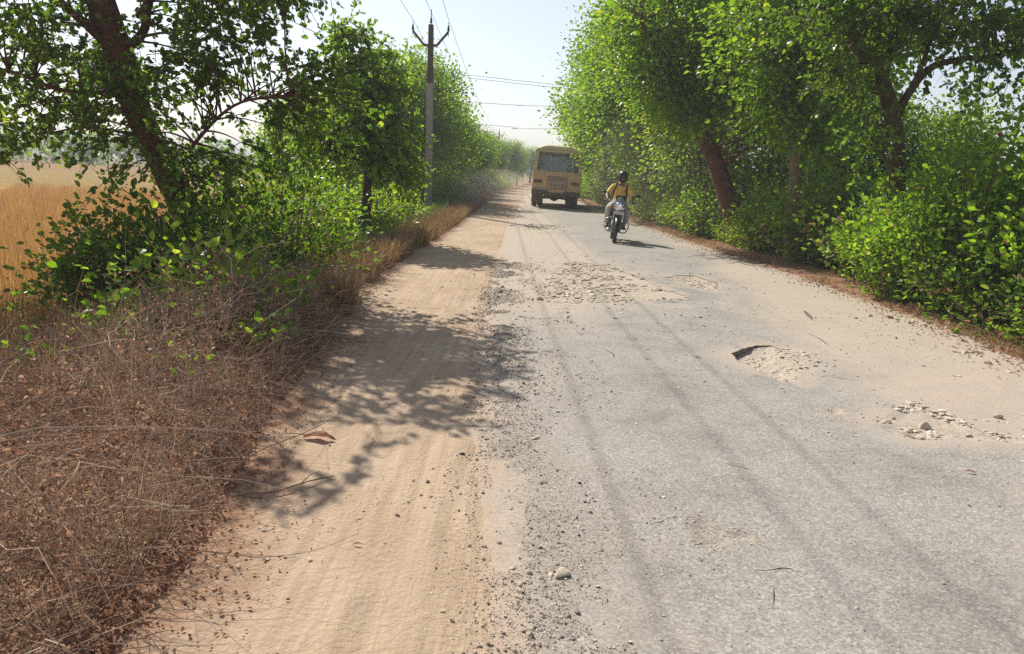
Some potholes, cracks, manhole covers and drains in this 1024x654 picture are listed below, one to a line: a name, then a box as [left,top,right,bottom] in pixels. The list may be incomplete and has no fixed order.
pothole [536,261,695,304]
pothole [668,276,718,291]
pothole [735,346,822,382]
pothole [868,400,1024,445]
